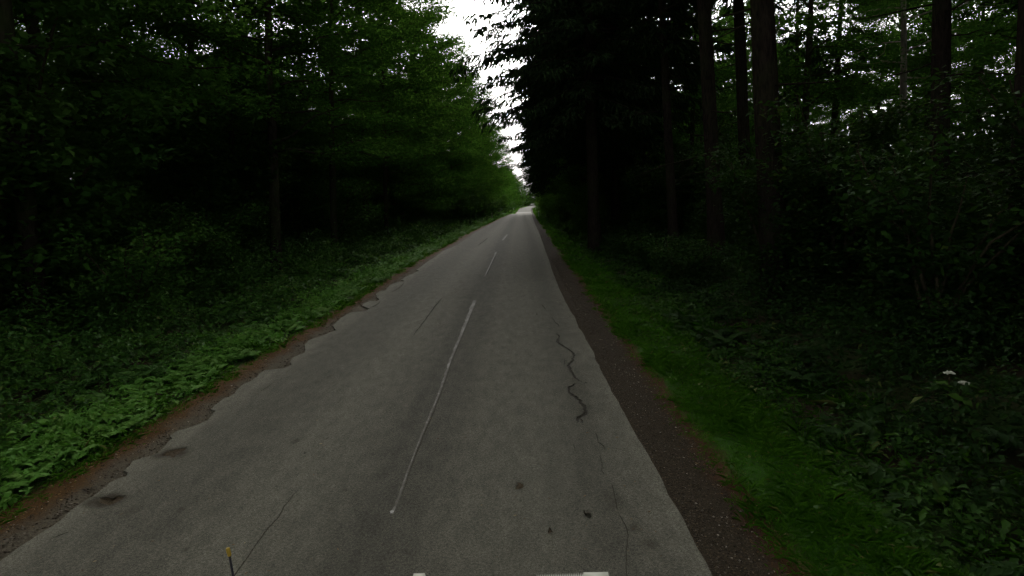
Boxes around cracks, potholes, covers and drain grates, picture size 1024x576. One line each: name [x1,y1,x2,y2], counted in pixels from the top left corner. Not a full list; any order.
crack [234,486,301,576]
crack [542,305,629,576]
pothole [162,446,187,458]
pothole [98,495,126,506]
